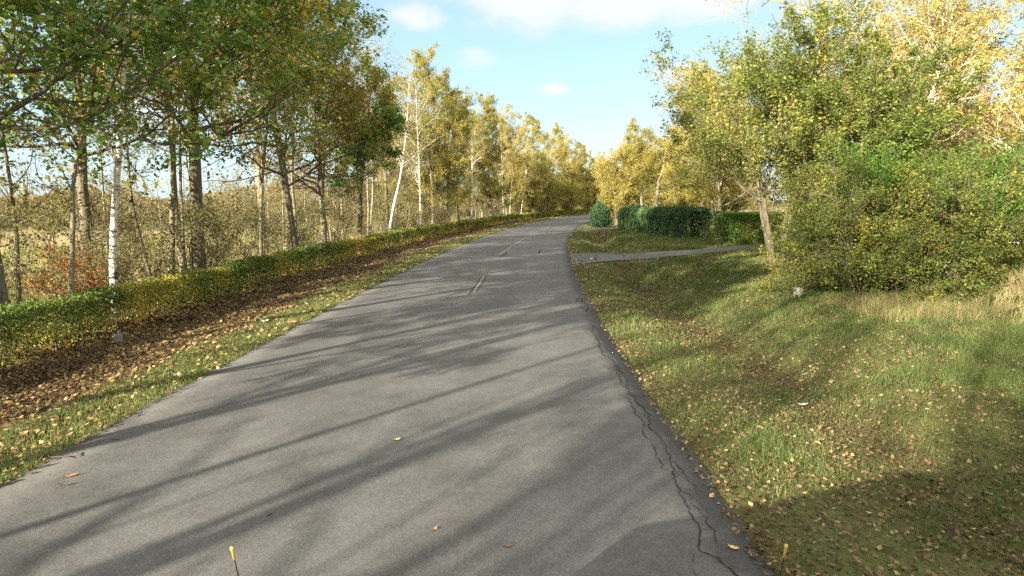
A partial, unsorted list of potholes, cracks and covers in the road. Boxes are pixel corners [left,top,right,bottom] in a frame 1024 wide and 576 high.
crack [576,298,739,576]
